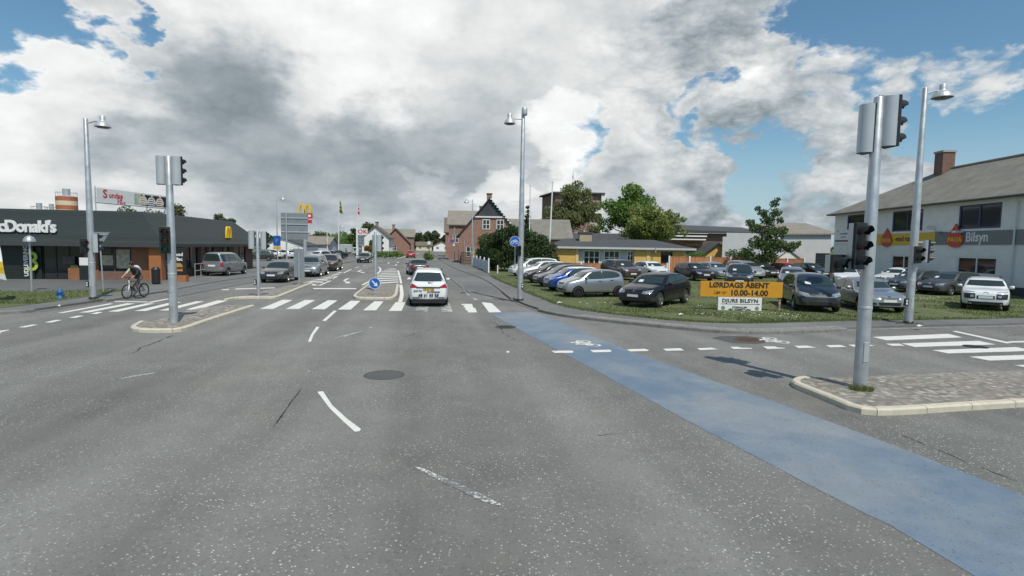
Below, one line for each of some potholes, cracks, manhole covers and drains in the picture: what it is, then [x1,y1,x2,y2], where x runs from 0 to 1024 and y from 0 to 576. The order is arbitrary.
manhole cover [363,370,405,380]
